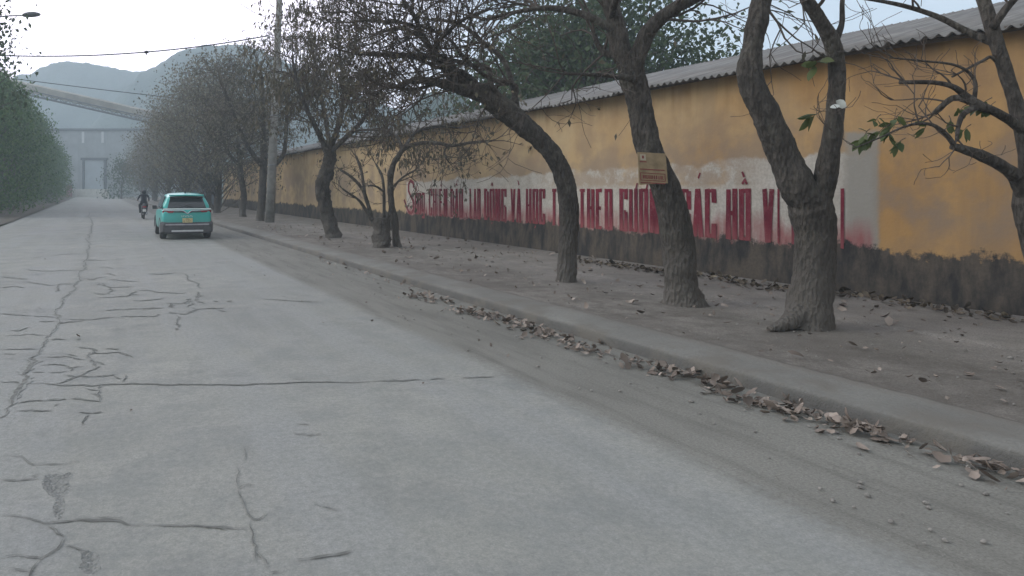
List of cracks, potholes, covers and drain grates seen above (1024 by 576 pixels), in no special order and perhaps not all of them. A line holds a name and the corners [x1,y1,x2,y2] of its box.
crack [0,212,493,424]
crack [296,550,352,560]
crack [1,444,278,576]
